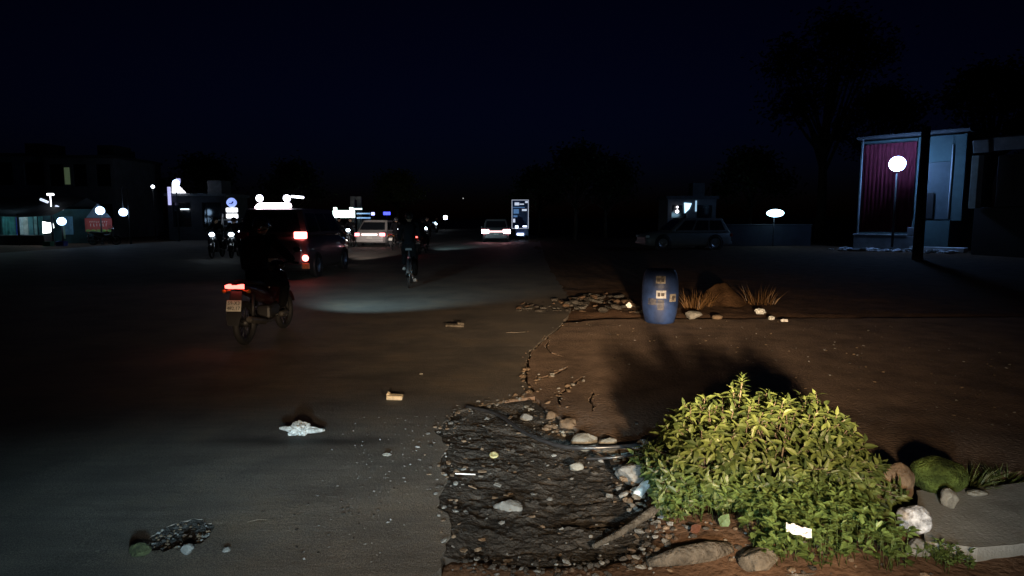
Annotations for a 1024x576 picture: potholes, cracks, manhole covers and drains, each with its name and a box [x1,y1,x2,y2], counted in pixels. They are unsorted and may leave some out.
pothole [149,518,214,552]
crack [499,324,599,414]
pothole [436,400,654,567]
